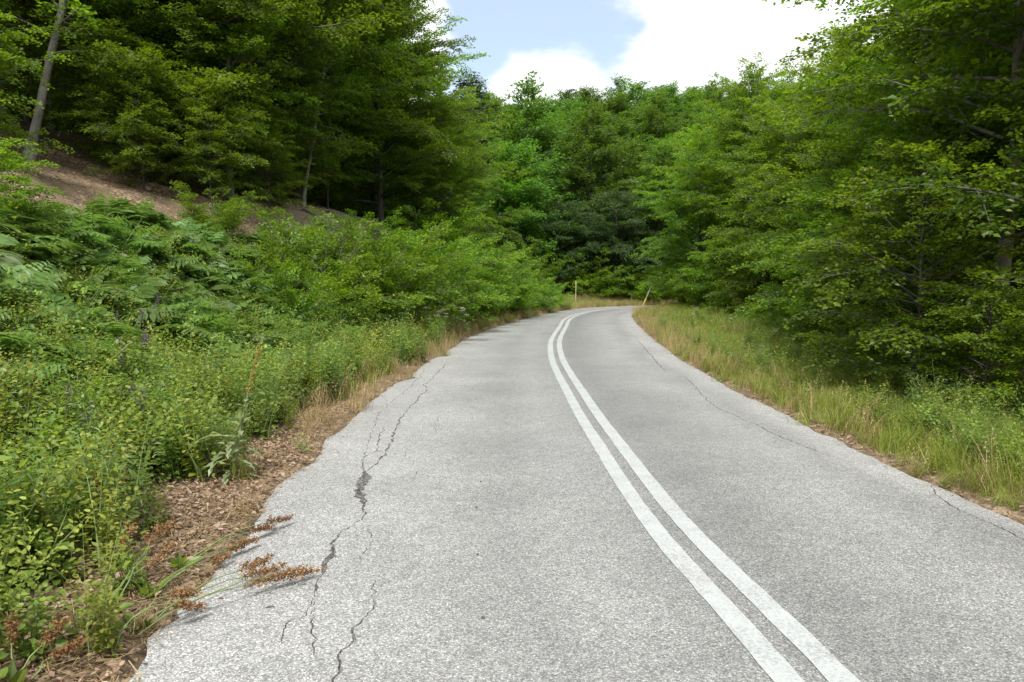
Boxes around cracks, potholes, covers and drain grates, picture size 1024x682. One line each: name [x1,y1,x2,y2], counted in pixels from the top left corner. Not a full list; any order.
crack [684,376,835,457]
crack [279,365,445,682]
crack [931,485,1024,540]
